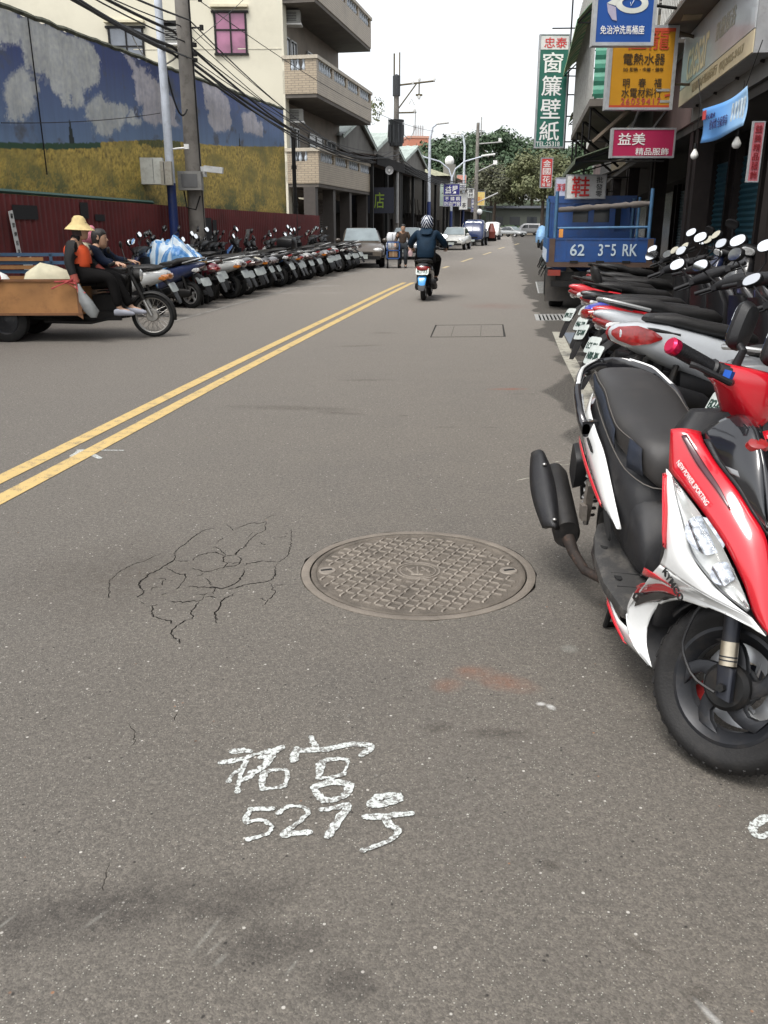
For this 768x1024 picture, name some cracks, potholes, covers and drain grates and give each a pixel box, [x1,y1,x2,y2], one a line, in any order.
crack [108,515,292,644]
manhole cover [301,531,537,621]
manhole cover [430,325,506,337]
